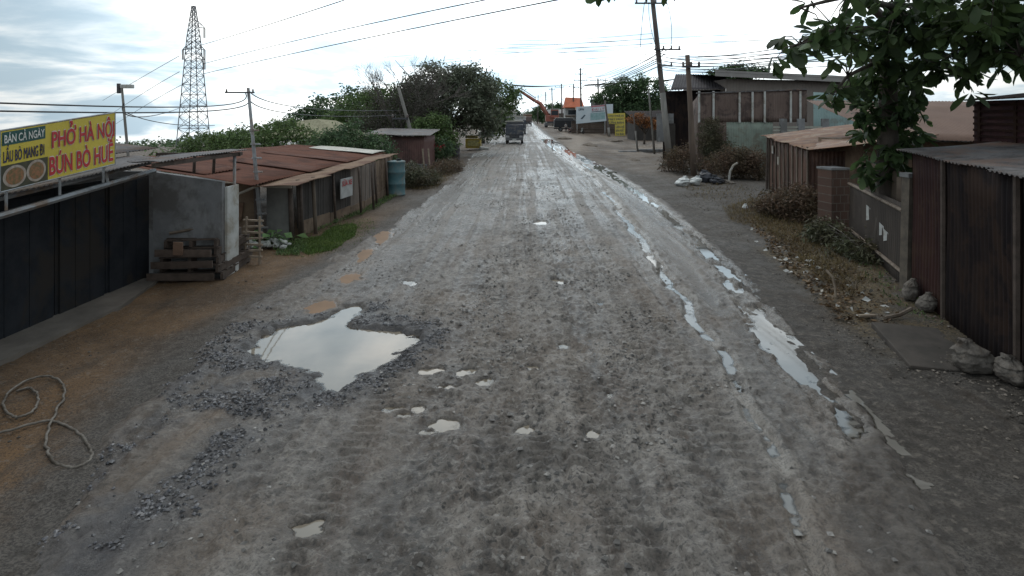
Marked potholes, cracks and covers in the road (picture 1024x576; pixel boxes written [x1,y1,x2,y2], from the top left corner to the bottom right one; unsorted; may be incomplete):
pothole [415,428,438,438]
pothole [412,365,451,376]
pothole [452,363,480,378]
pothole [378,401,411,413]
pothole [511,419,538,436]
pothole [235,300,426,395]
pothole [390,409,417,418]
pothole [582,426,605,439]
pothole [408,402,428,414]
pothole [422,411,467,434]
pothole [281,511,331,538]
